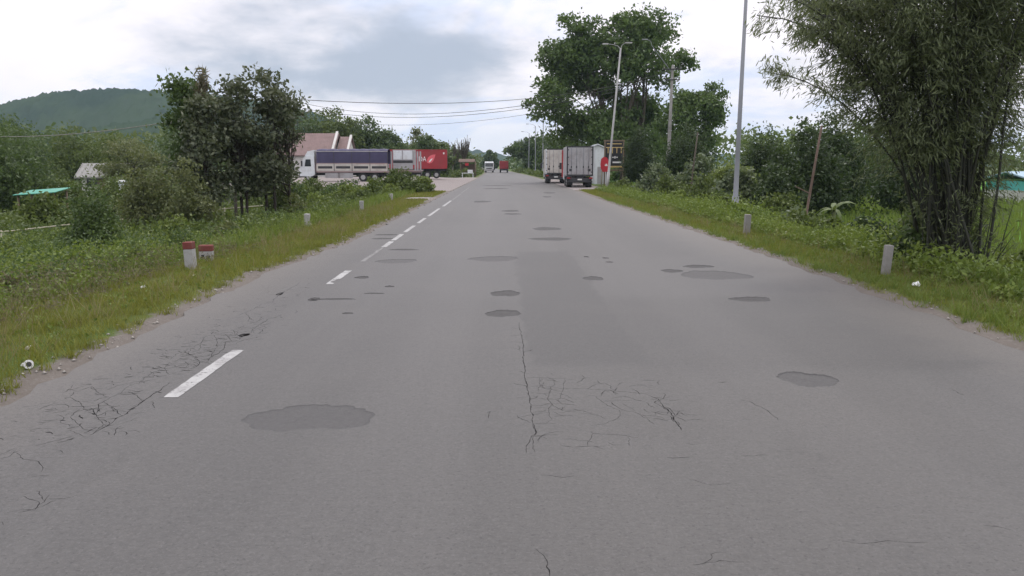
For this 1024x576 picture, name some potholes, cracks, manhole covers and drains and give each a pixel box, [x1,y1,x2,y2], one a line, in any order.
crack [0,278,309,523]
crack [509,328,699,458]
